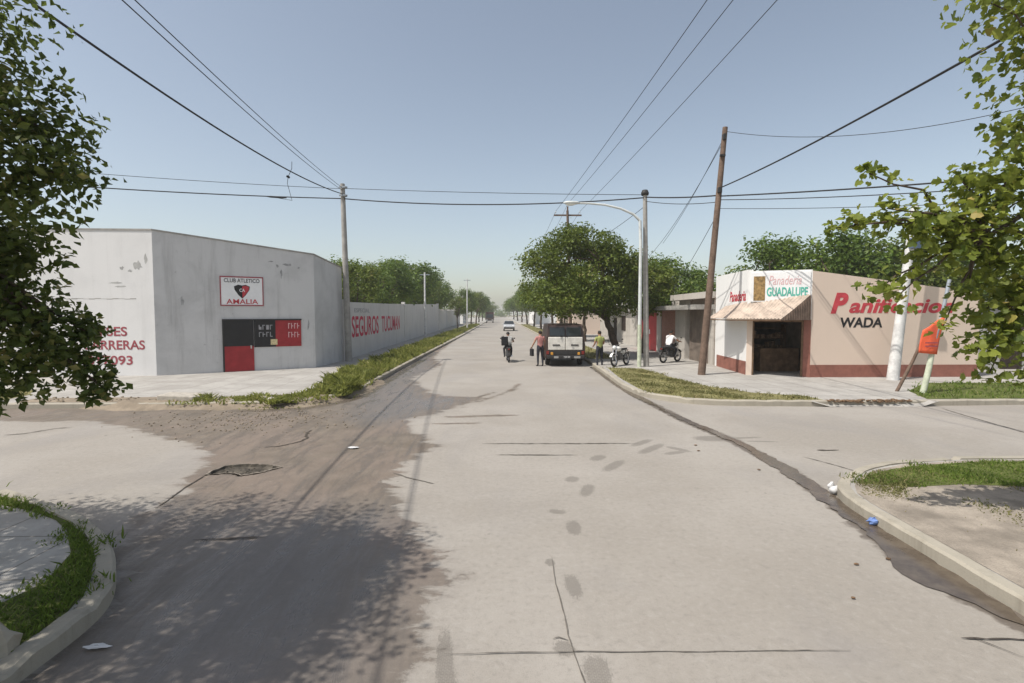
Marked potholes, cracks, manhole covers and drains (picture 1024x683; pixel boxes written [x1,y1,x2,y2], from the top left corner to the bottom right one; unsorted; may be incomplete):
crack [446,560,820,683]
pothole [206,463,282,476]
